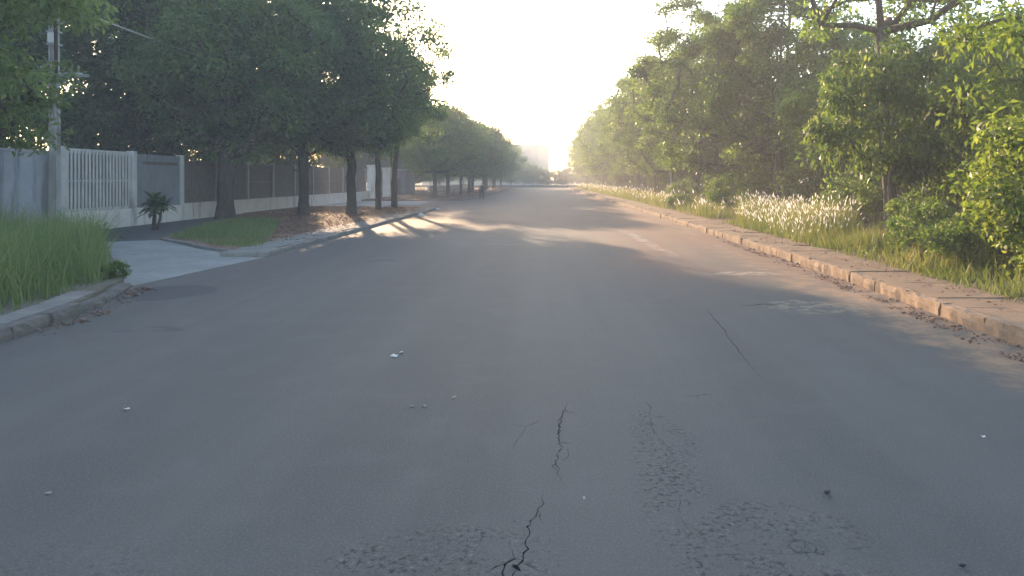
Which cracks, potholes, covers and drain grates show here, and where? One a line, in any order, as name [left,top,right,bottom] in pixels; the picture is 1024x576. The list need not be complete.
crack [488,498,544,576]
crack [552,407,575,481]
crack [644,402,831,560]
